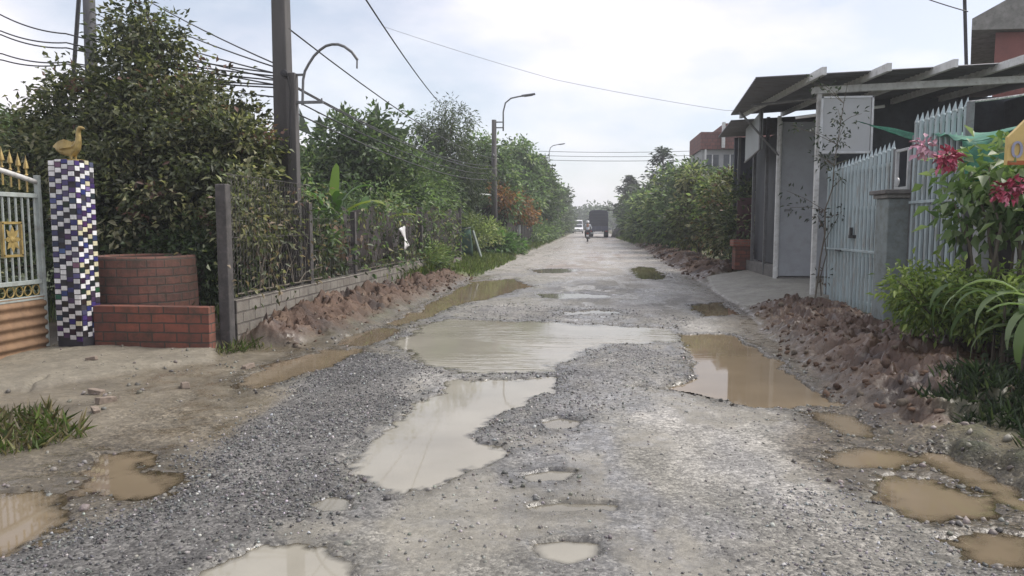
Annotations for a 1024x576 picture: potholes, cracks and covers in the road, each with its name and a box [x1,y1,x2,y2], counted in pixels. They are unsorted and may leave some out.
pothole [0,476,108,566]
pothole [495,523,641,576]
pothole [833,470,1017,527]
pothole [150,525,398,576]
pothole [651,332,870,412]
pothole [889,428,1024,521]
